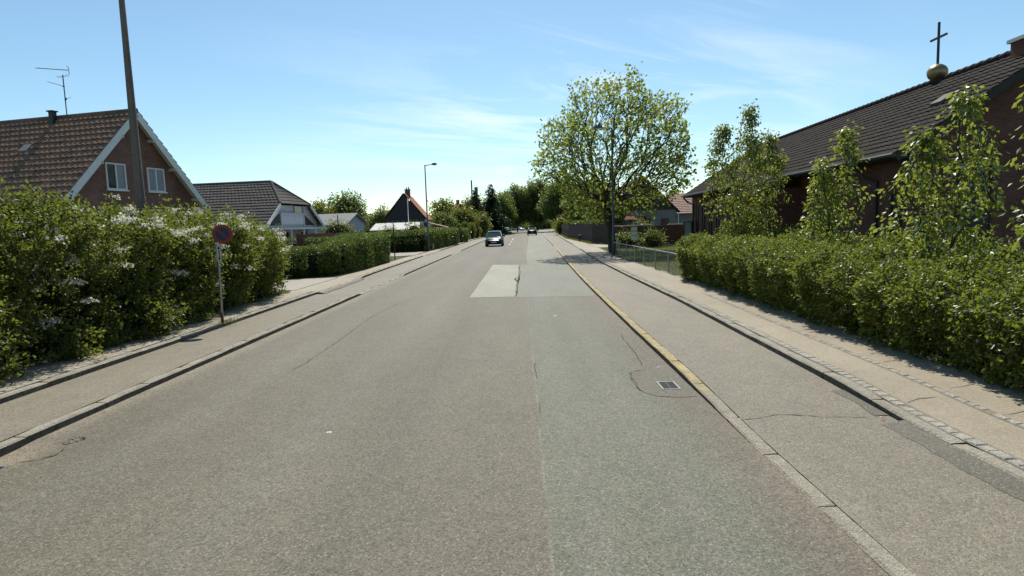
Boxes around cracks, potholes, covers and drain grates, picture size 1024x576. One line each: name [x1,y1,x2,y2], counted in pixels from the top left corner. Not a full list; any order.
drain grate [656,381,681,390]
